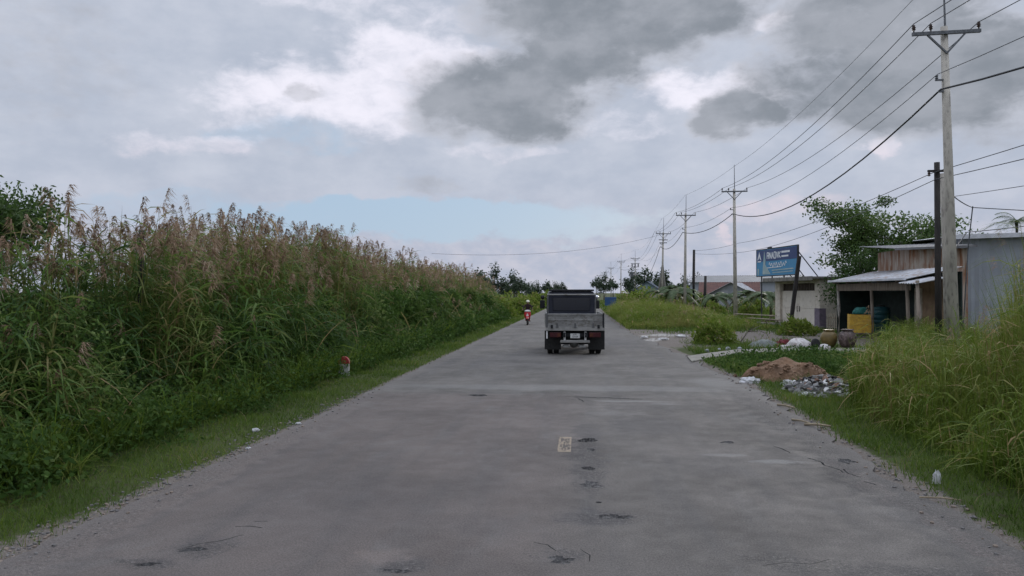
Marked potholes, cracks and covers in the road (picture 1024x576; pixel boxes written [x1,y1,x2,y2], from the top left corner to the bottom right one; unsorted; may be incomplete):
pothole [580,480,603,488]
pothole [548,555,575,564]
crack [774,446,876,485]
crack [178,521,262,550]
